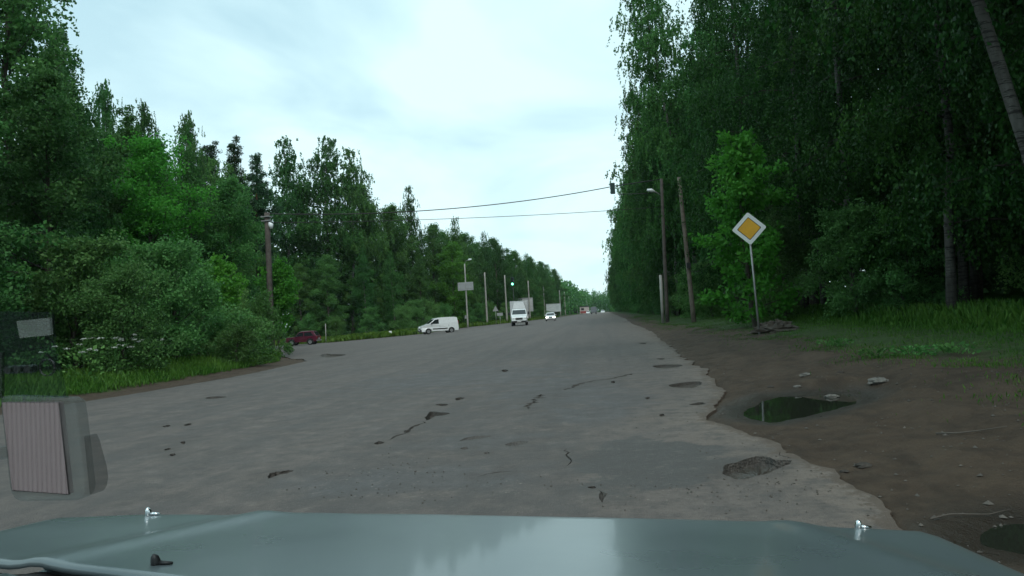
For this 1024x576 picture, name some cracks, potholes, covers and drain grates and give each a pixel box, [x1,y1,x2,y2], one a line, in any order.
crack [564,374,632,390]
crack [391,422,426,439]
pothole [722,456,792,479]
crack [523,394,544,409]
